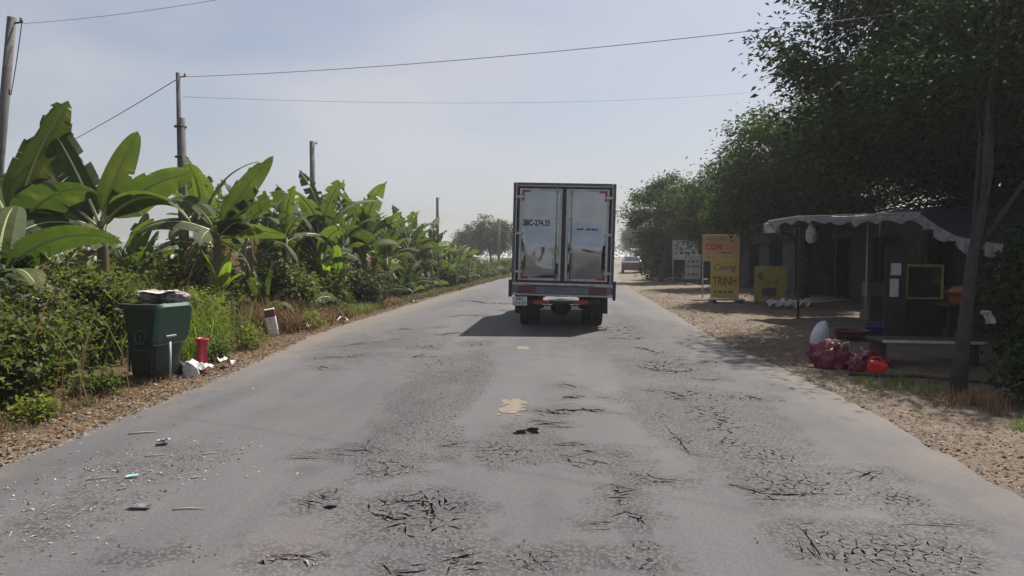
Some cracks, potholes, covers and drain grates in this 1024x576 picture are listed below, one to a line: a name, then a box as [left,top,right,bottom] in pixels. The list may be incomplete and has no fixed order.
crack [367,491,560,576]
crack [297,439,413,477]
pothole [512,427,539,437]
crack [298,486,339,510]
crack [598,323,983,576]
crack [520,382,680,570]
crack [266,550,330,569]
